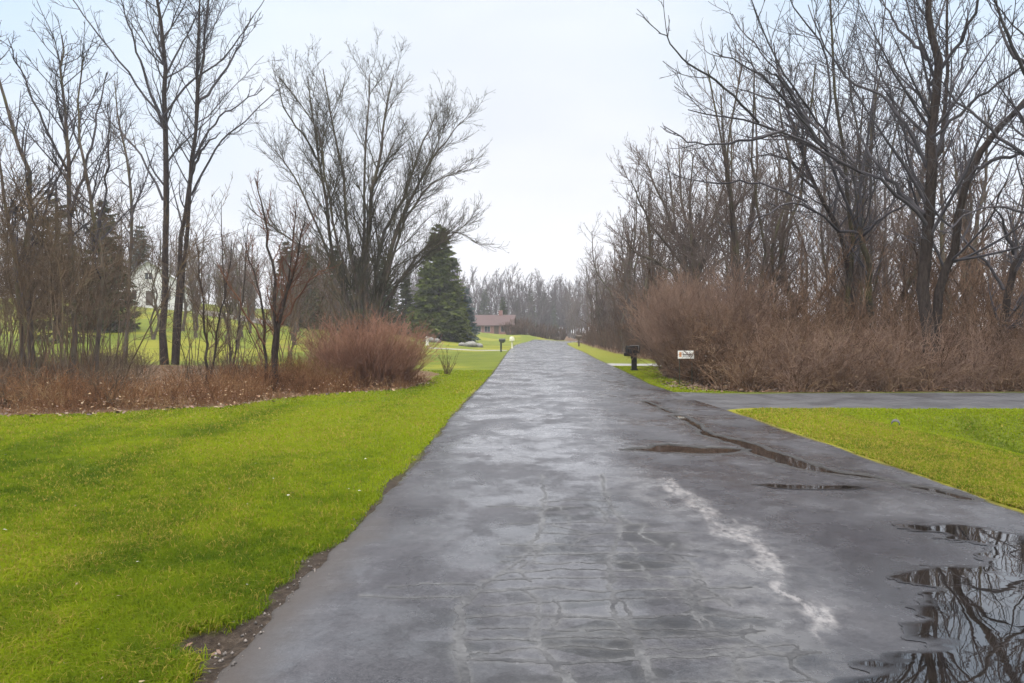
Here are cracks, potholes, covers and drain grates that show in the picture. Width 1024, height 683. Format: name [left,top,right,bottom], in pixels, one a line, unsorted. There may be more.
crack [359,400,908,683]
